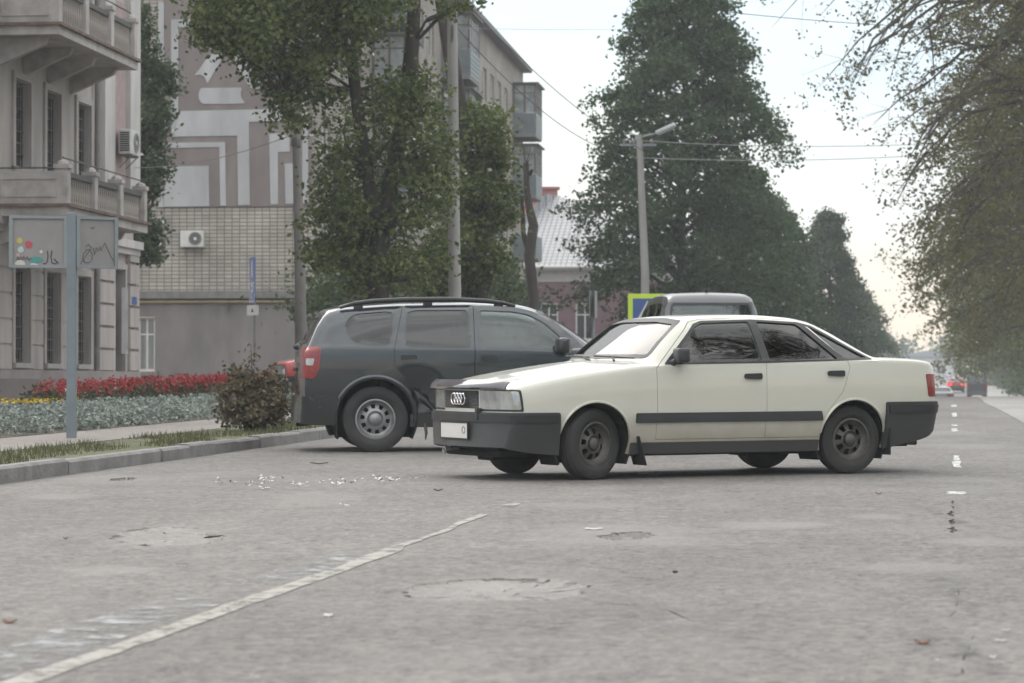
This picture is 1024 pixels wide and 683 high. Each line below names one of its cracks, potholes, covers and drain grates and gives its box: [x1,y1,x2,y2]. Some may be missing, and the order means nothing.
crack [938,500,960,533]
pothole [597,531,657,540]
